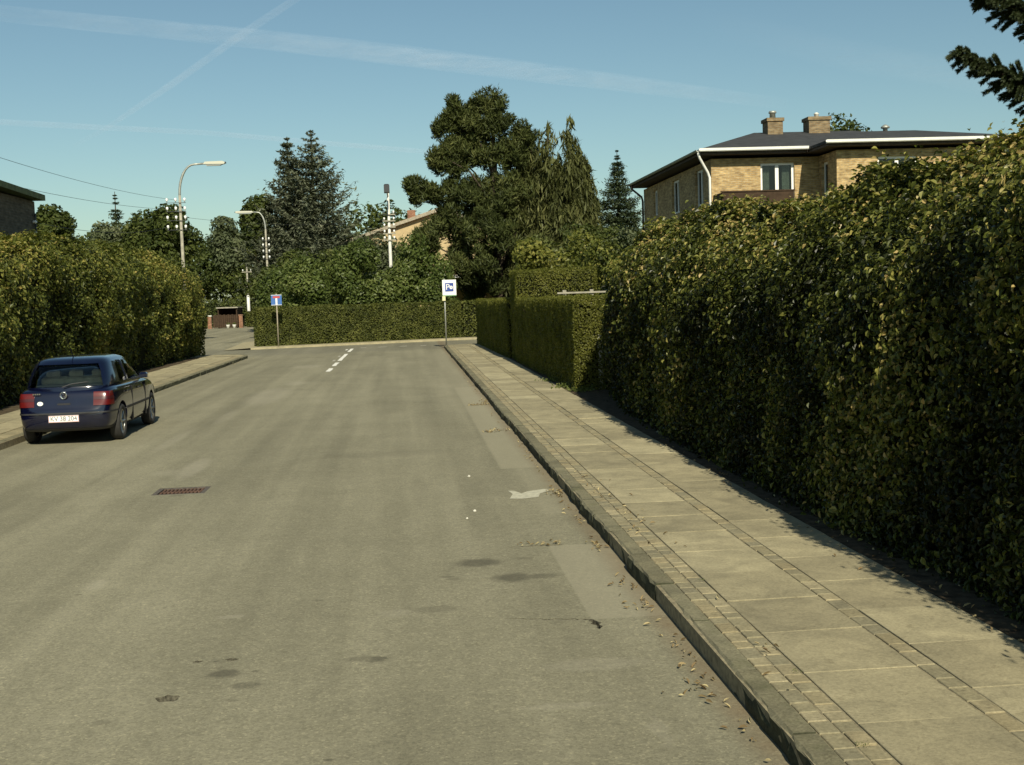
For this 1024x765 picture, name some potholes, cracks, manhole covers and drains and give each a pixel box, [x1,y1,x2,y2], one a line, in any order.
crack [510,618,602,629]
